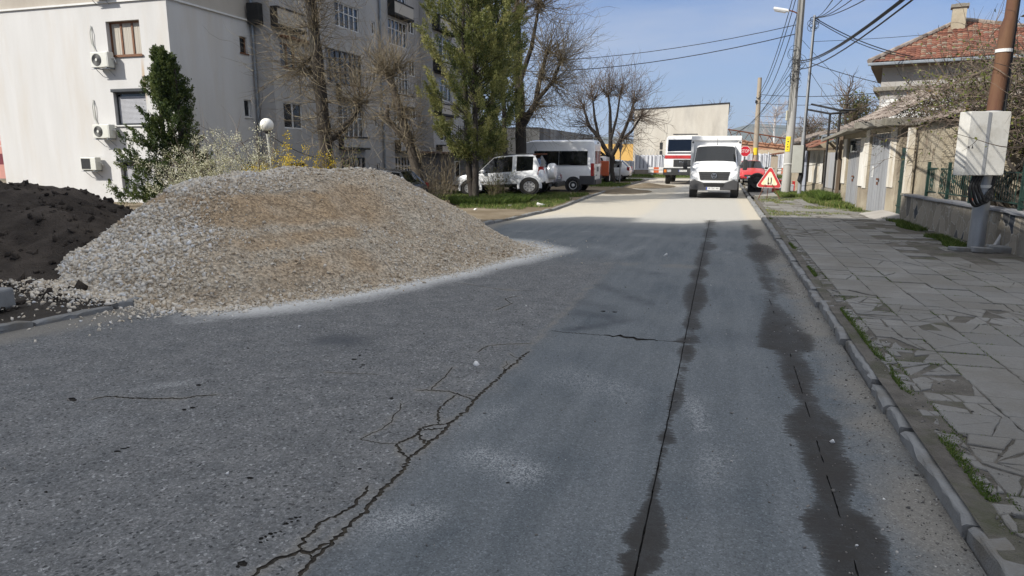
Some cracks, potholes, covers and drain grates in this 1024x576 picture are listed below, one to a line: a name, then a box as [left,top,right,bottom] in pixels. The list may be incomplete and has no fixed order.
crack [252,343,531,576]
crack [557,331,685,343]
